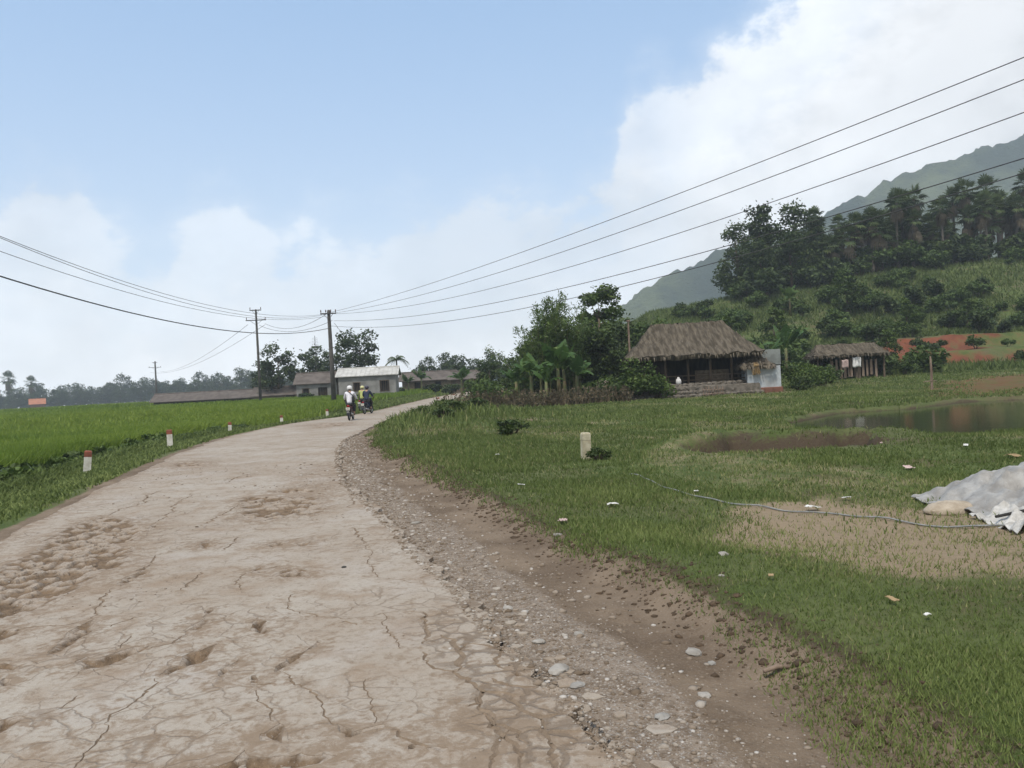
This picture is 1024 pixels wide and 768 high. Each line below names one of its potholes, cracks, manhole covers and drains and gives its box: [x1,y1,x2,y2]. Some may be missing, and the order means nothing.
pothole [160,644,217,675]
pothole [250,620,268,634]
crack [255,671,334,725]
pothole [0,516,149,619]
pothole [235,496,328,521]
crack [24,588,149,648]
crack [354,528,422,584]
pothole [274,642,321,673]
crack [74,679,159,768]
crack [287,593,607,768]
pothole [75,646,149,670]
crack [79,492,191,521]
